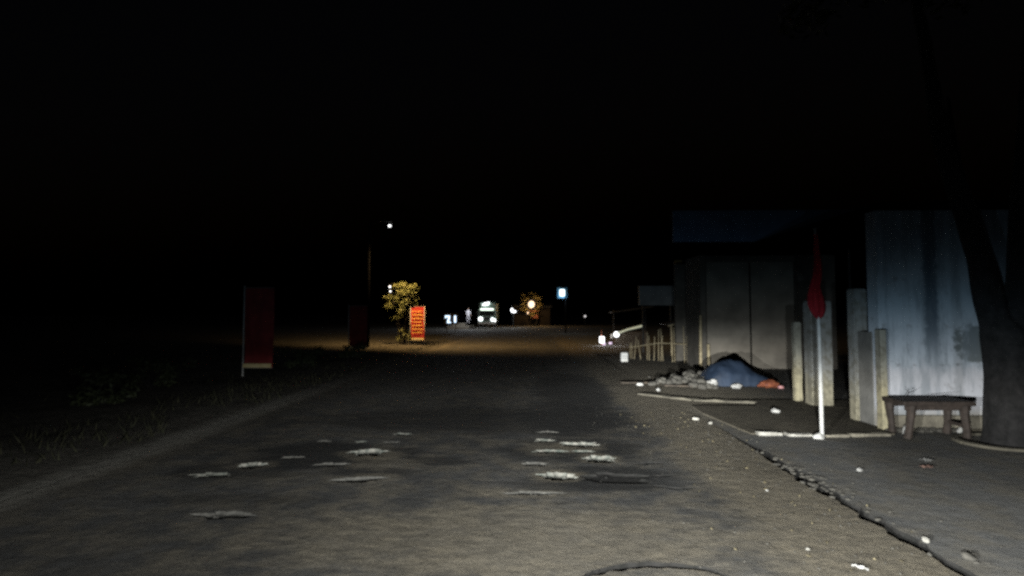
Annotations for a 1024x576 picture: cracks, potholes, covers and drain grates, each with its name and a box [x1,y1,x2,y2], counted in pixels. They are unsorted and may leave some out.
pothole [190,511,258,520]
pothole [581,455,616,463]
pothole [535,472,579,481]
